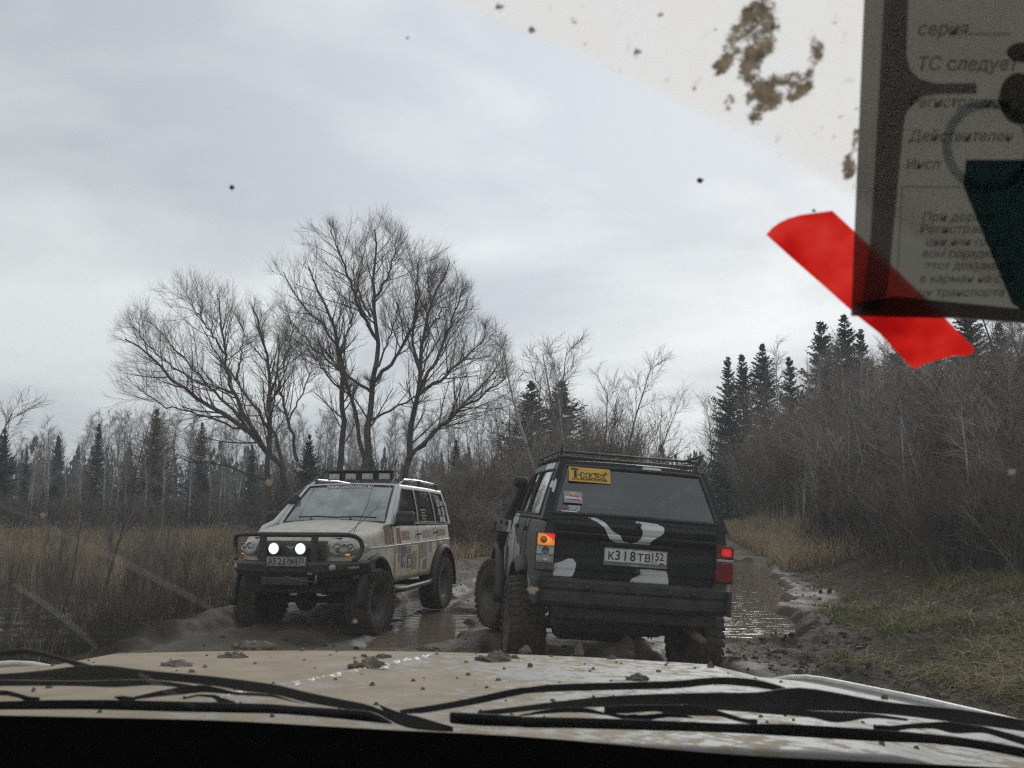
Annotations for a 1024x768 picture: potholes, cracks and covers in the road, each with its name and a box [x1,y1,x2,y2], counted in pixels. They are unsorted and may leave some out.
pothole [723,557,817,640]
